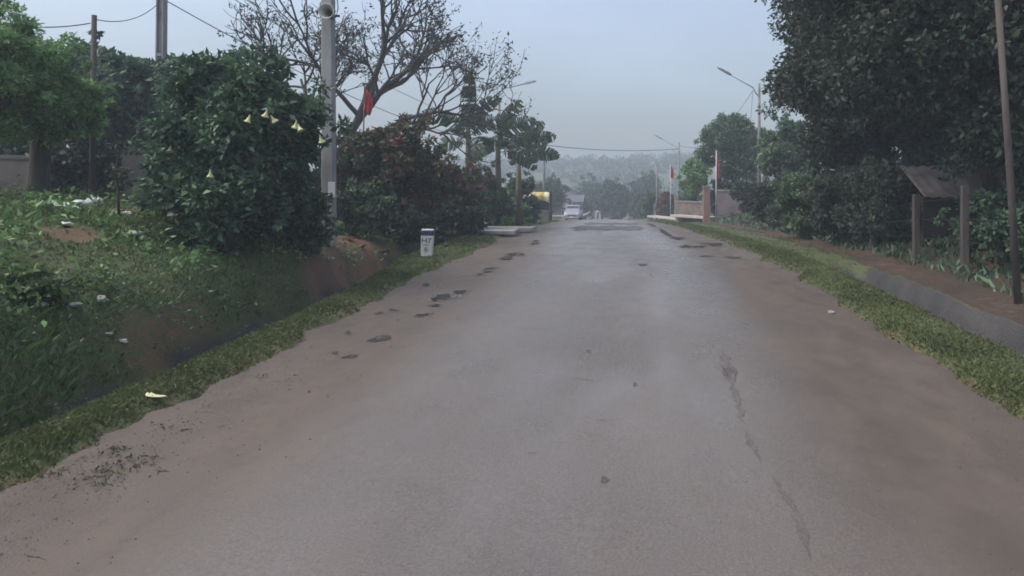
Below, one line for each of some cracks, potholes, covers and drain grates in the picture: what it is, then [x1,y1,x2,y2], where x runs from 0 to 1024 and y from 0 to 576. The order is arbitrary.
pothole [427,292,463,302]
